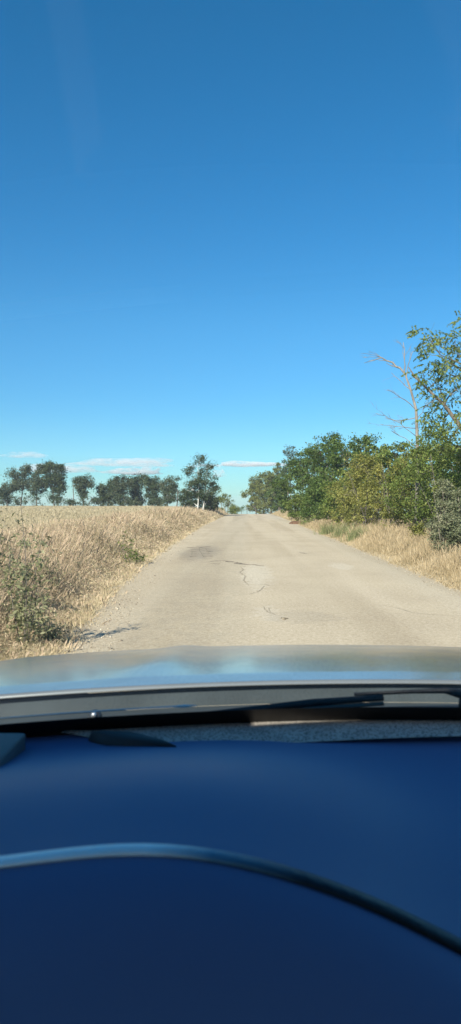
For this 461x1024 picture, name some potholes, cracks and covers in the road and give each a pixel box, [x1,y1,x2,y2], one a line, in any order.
crack [187,546,275,615]
